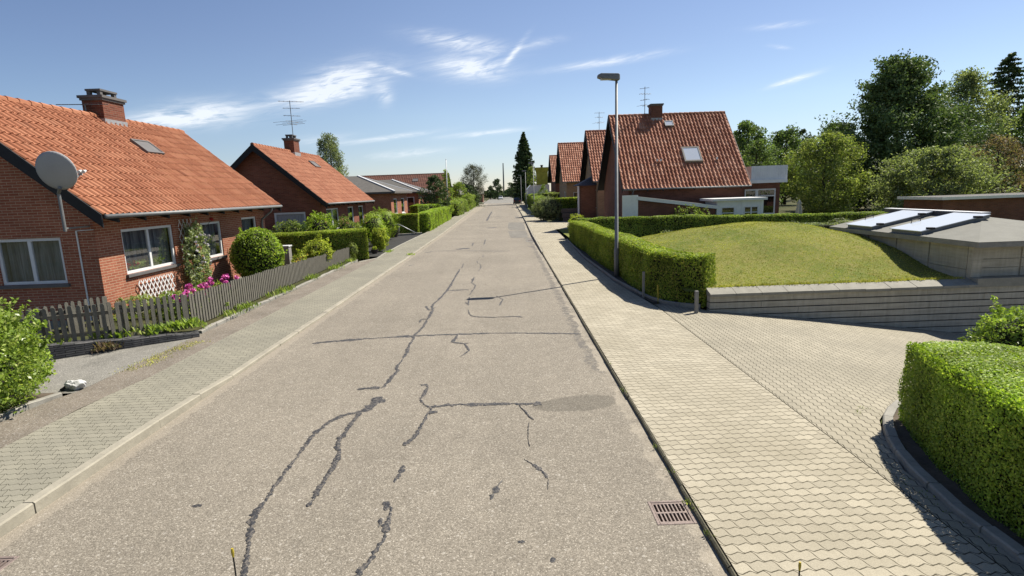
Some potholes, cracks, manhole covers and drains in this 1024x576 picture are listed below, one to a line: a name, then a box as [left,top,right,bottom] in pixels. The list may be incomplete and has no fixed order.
drain grate [647,500,698,525]
crack [524,459,549,489]
